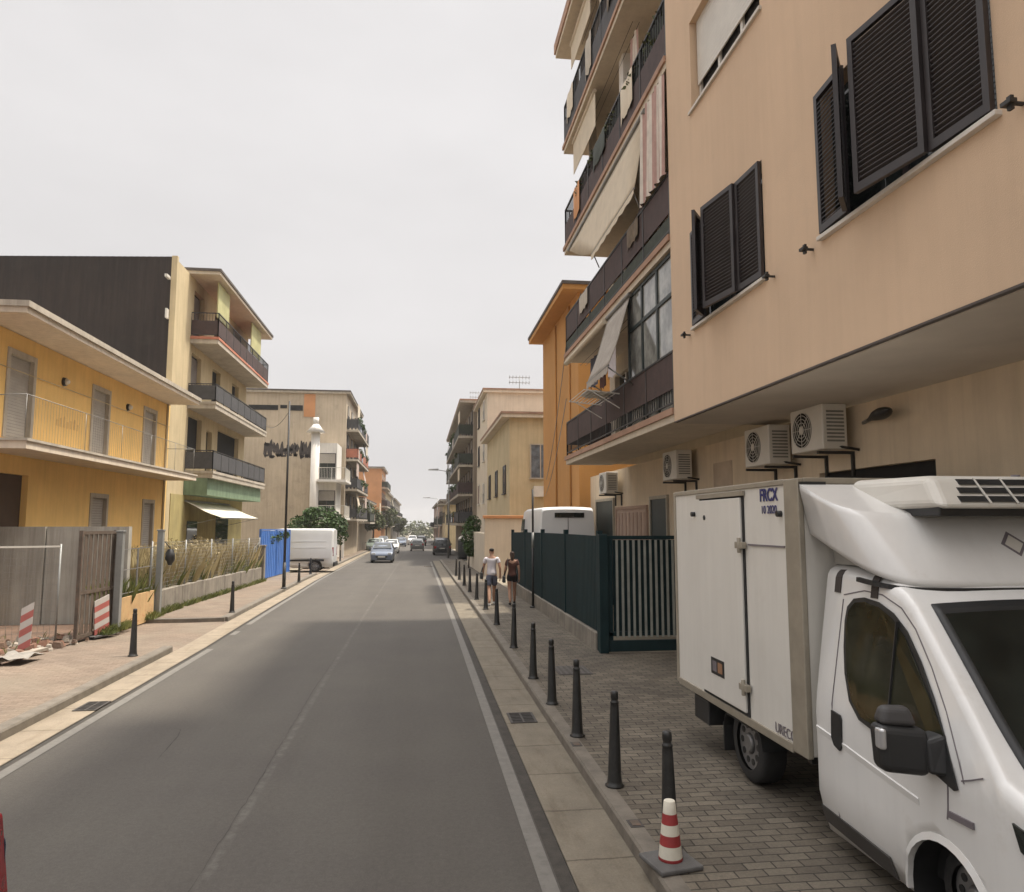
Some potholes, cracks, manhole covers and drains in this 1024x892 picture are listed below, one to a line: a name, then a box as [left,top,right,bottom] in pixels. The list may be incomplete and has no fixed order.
drain grate [506,712,538,723]
drain grate [72,701,111,711]
